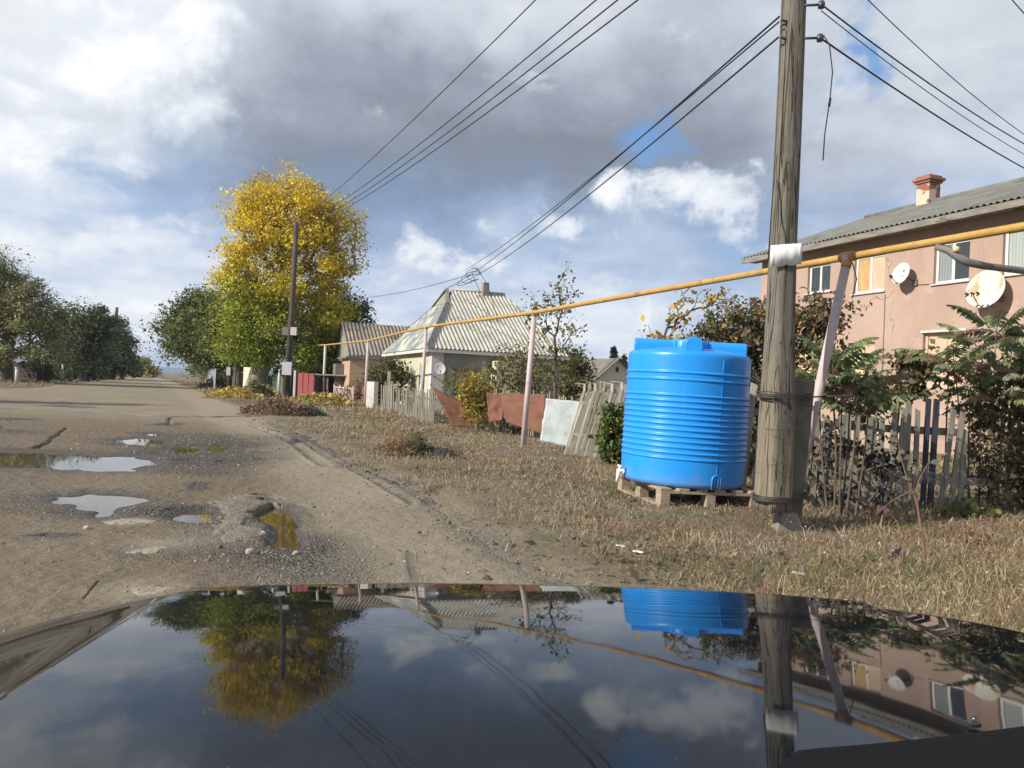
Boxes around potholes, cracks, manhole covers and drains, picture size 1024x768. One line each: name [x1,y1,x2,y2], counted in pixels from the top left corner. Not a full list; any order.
pothole [0,449,173,473]
pothole [200,443,239,453]
pothole [95,437,182,447]
pothole [252,503,312,549]
pothole [162,506,224,523]
crack [0,408,257,449]
pothole [18,489,179,520]
